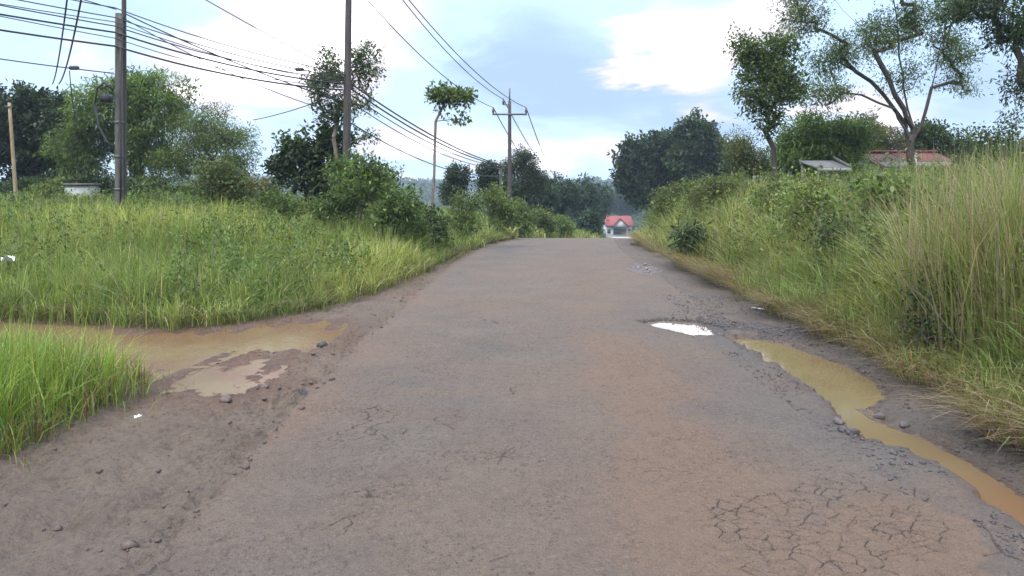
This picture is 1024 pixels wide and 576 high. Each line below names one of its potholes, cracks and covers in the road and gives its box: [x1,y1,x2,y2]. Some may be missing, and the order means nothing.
pothole [725,334,1005,511]
crack [329,489,385,533]
crack [315,405,465,450]
pothole [625,263,662,274]
crack [708,470,959,576]
pothole [637,317,728,337]
crack [487,447,515,465]
